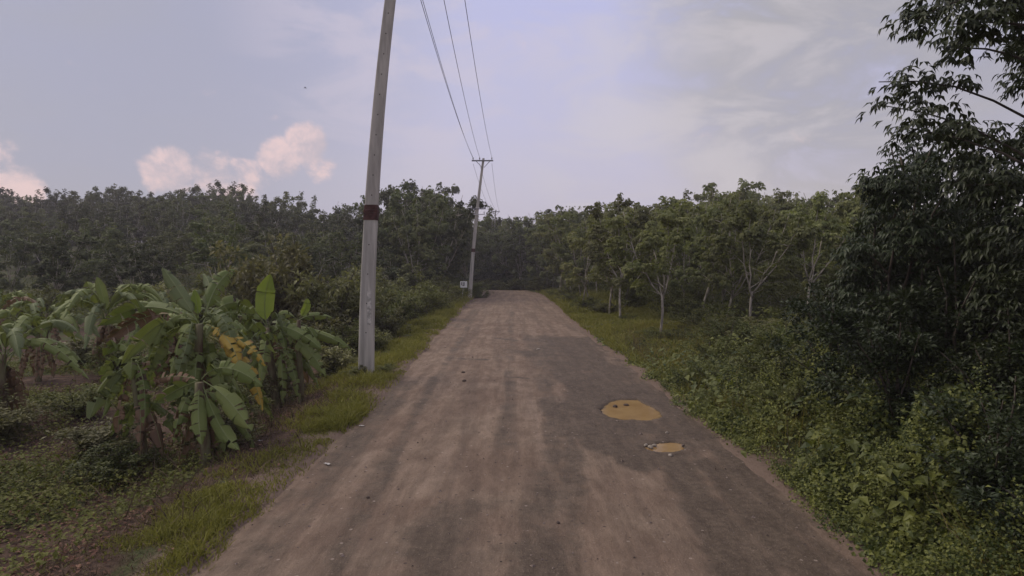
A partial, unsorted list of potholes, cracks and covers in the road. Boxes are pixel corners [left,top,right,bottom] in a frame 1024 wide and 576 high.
pothole [591,397,670,423]
pothole [634,439,697,455]
